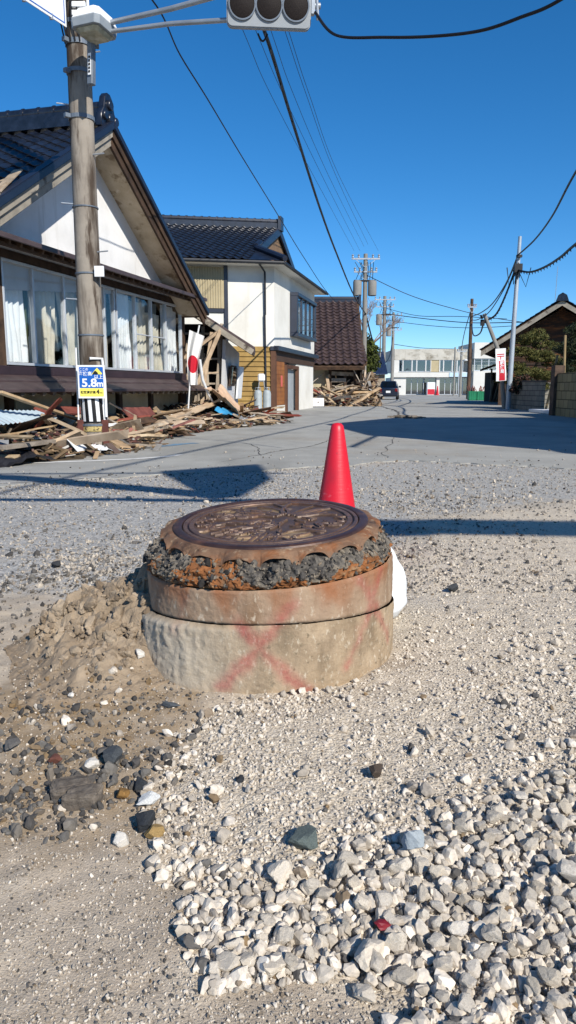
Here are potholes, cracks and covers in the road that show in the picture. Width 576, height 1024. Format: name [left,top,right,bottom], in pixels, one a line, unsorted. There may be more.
manhole cover [172,498,369,550]
